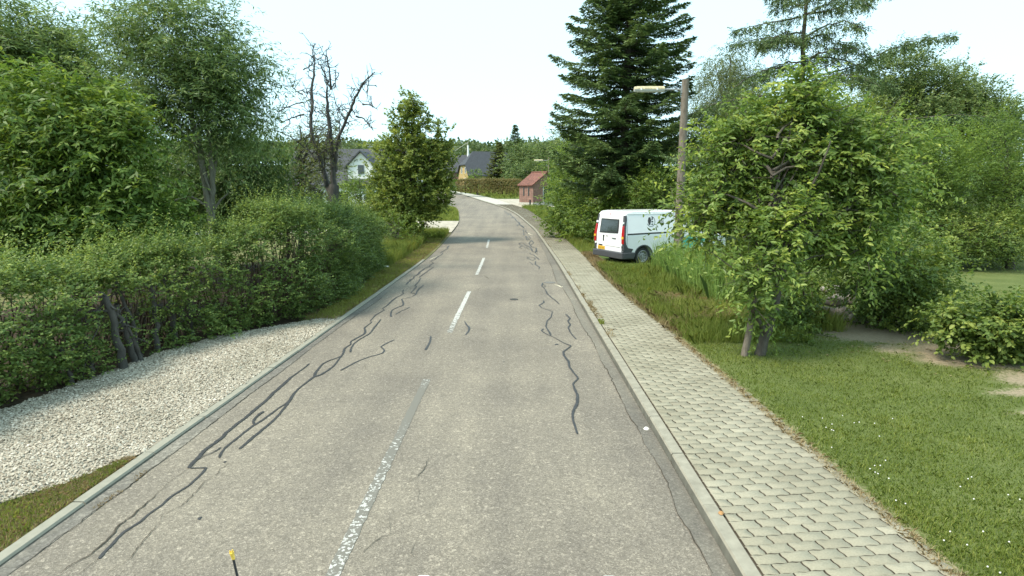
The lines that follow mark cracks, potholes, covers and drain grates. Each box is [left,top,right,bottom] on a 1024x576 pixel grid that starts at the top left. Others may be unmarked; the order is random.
crack [547,258,714,575]
